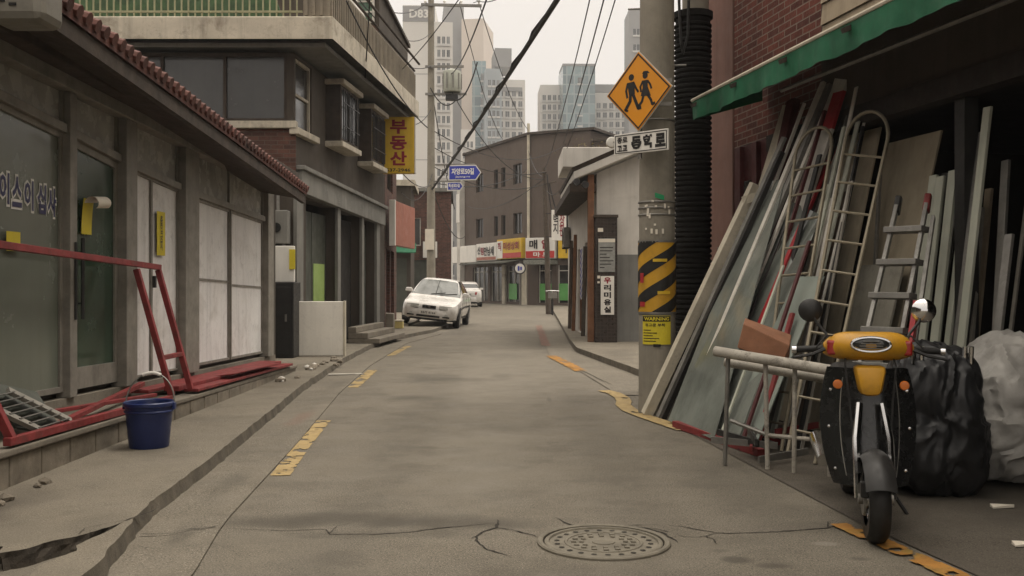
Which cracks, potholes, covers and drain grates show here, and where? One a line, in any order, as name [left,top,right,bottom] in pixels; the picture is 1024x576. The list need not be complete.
crack [558,518,834,544]
manhole cover [537,524,671,561]
crack [153,520,537,556]
